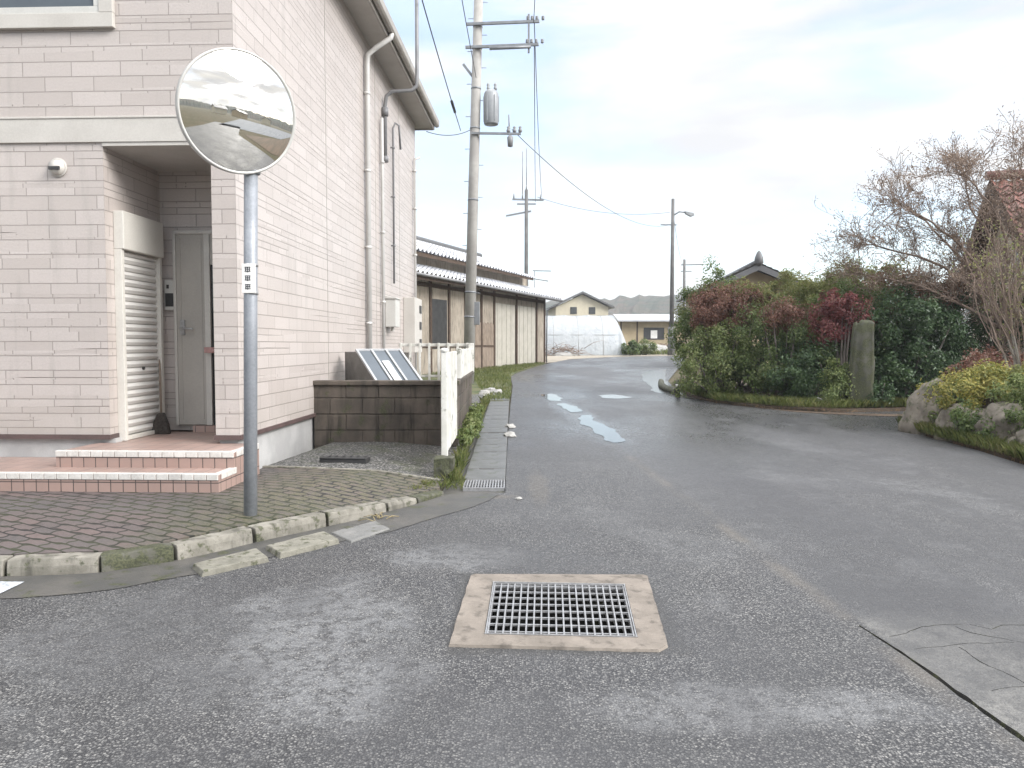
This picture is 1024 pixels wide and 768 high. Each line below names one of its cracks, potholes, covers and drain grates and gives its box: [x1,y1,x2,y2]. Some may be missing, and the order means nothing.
drain grate [463,480,505,491]
crack [859,624,1024,742]
